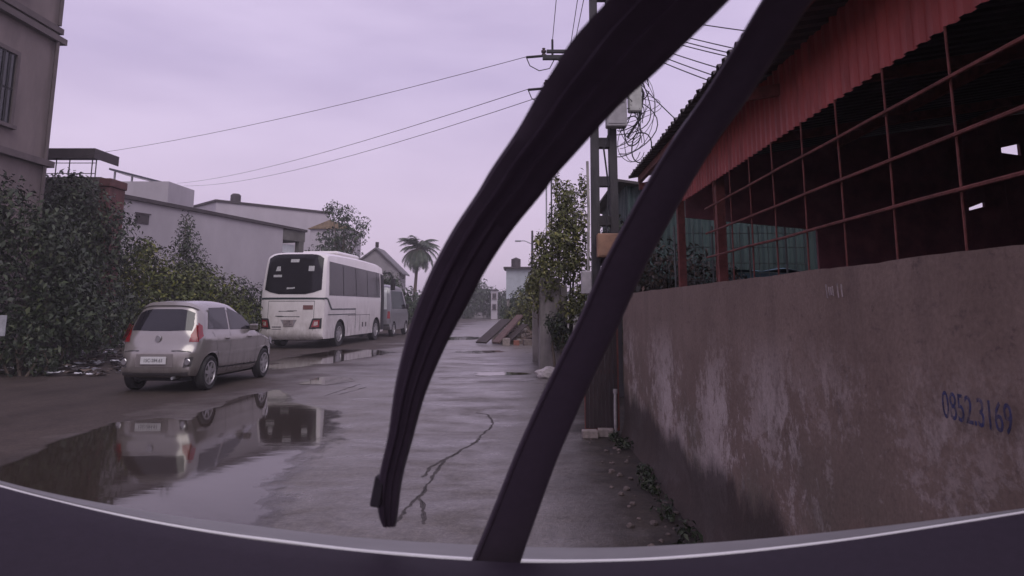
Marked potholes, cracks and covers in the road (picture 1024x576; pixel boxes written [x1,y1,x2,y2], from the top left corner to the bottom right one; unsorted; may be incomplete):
crack [397,412,494,524]
